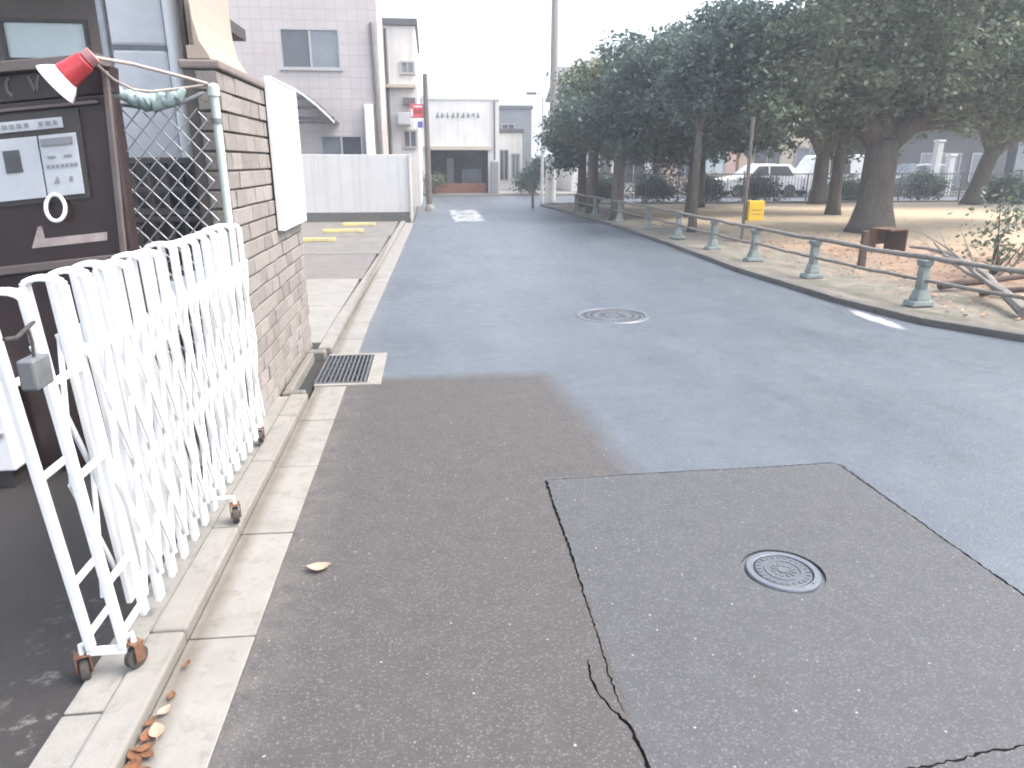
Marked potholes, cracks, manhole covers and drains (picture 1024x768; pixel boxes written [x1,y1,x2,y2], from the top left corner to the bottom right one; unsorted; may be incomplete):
drain grate [313,352,387,389]
manhole cover [741,552,826,594]
manhole cover [575,308,650,324]
crack [544,463,1024,768]
